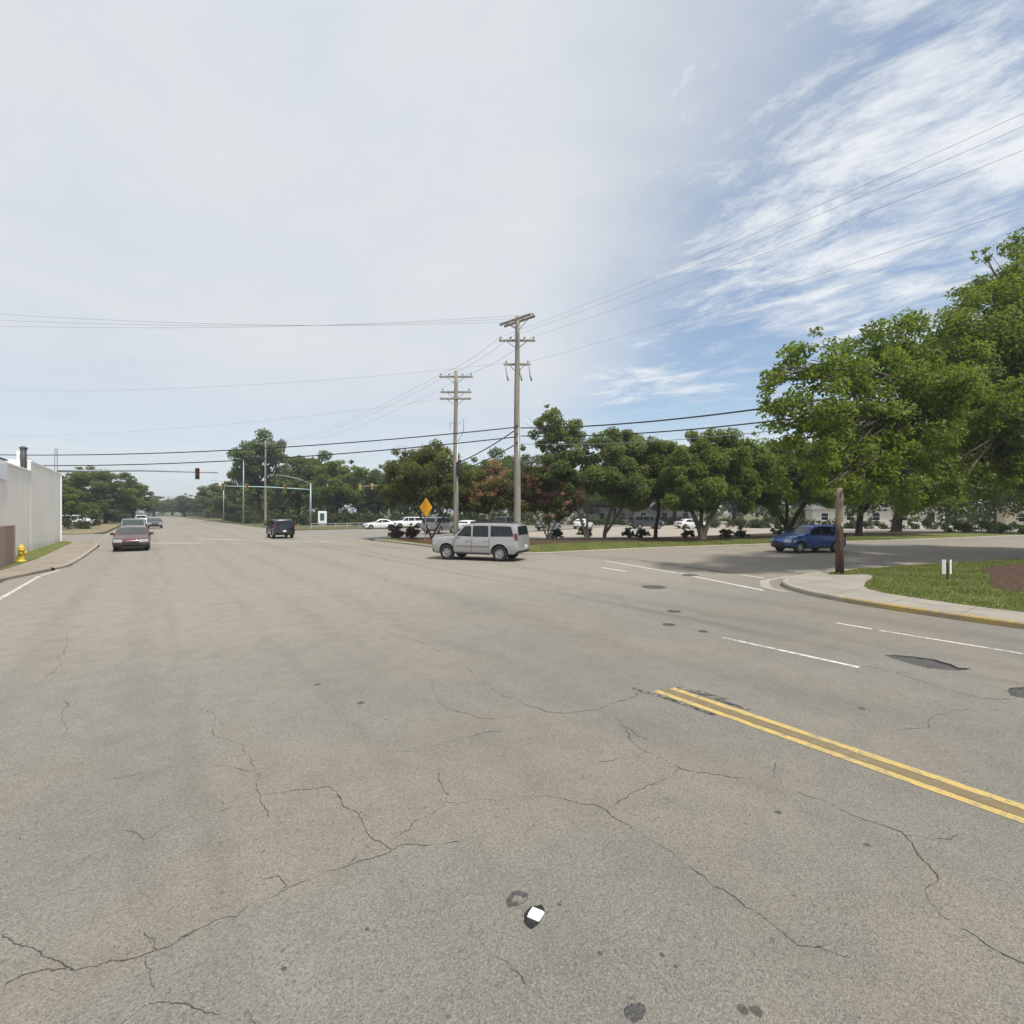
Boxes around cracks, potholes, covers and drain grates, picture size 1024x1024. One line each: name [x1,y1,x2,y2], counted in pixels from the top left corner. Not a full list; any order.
pothole [1008,687,1024,698]
crack [773,764,1024,964]
pothole [884,655,969,671]
crack [2,628,843,1023]
